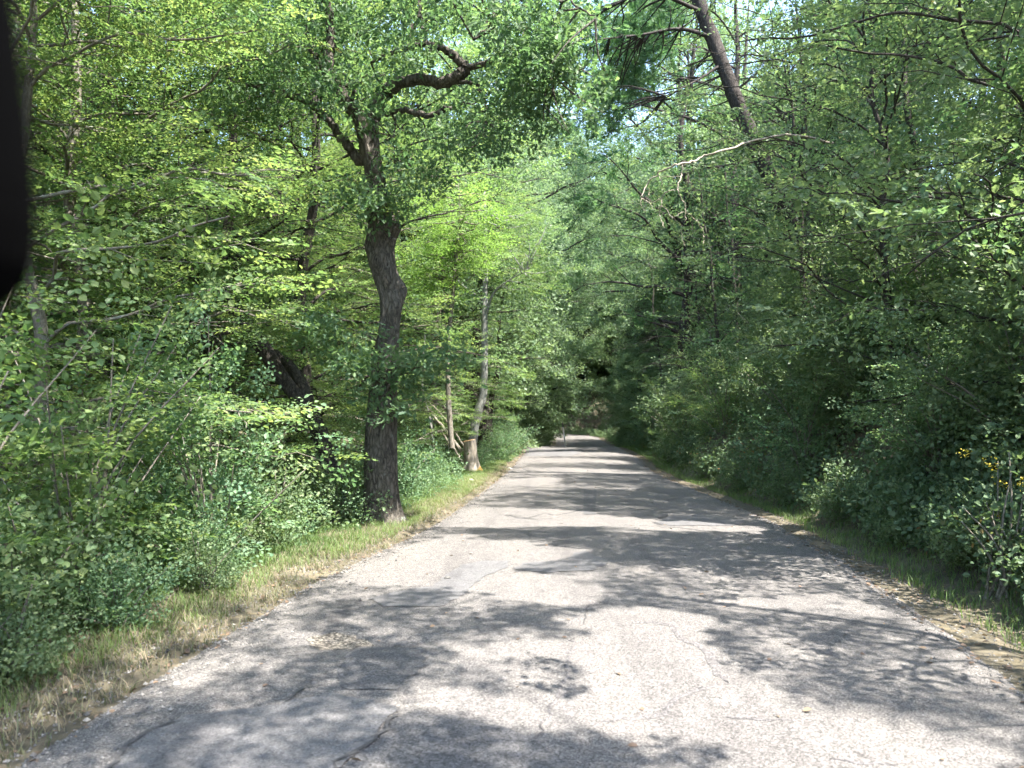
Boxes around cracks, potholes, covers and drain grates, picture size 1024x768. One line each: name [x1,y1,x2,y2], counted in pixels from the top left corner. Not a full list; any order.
crack [332,707,400,768]
crack [108,711,185,768]
